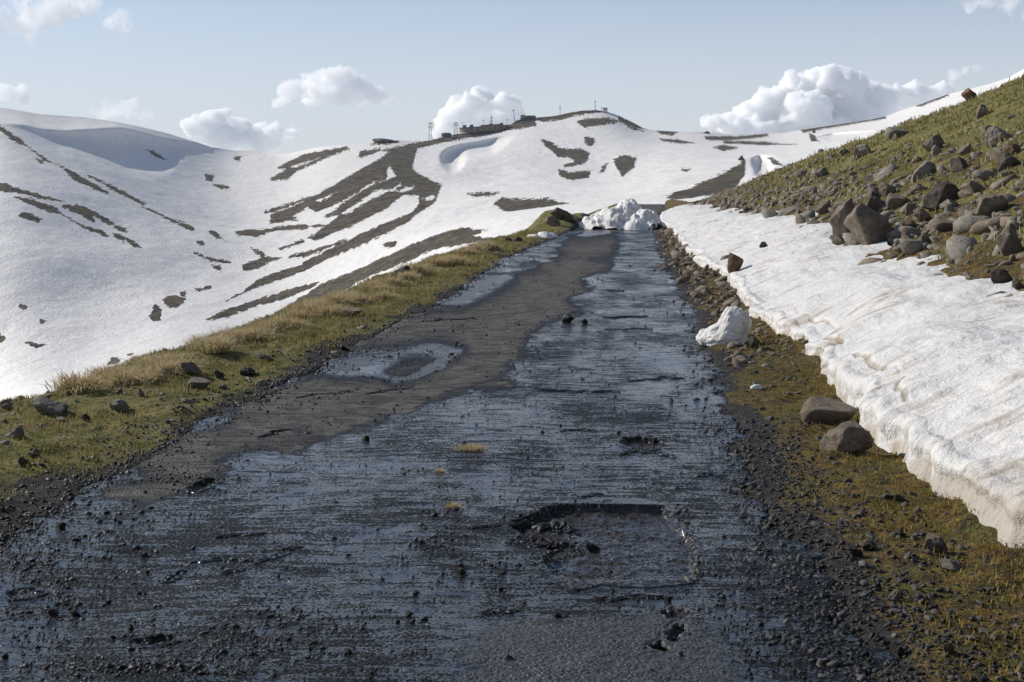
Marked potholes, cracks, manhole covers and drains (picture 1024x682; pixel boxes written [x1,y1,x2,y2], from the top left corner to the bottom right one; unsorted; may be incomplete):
pothole [617,436,666,452]
pothole [500,503,705,591]
